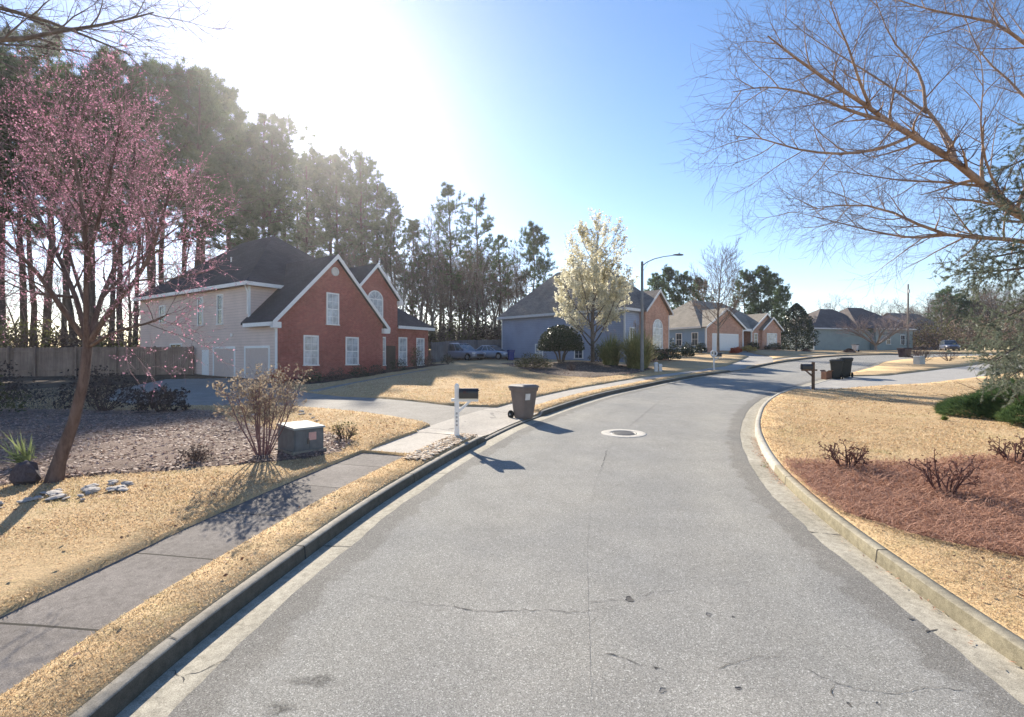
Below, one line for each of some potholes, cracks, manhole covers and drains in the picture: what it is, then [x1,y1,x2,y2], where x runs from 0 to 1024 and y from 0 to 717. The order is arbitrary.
manhole cover [601,429,647,438]
crack [363,594,574,612]
crack [719,656,967,695]
